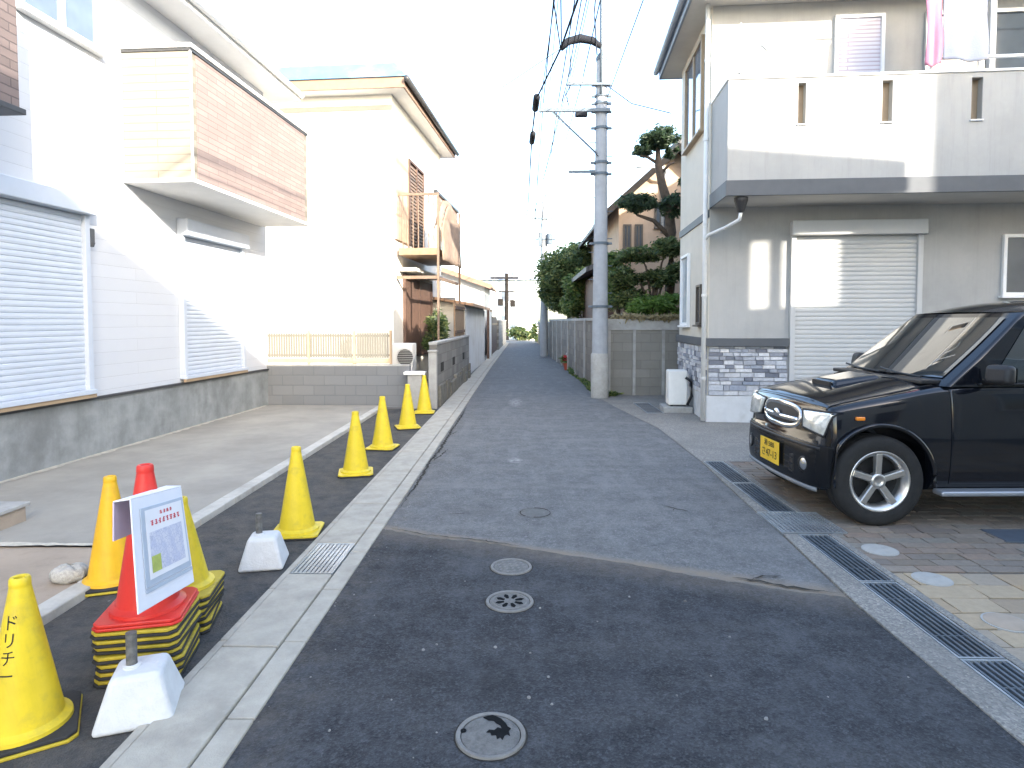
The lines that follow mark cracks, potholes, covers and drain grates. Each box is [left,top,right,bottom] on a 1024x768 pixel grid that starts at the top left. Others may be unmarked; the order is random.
manhole cover [490,558,533,576]
crack [733,575,841,593]
manhole cover [453,712,528,762]
crack [399,408,466,514]
drain grate [290,543,355,578]
drain grate [757,512,848,536]
drain grate [860,582,1005,660]
drain grate [634,403,664,413]
drain grate [732,483,795,512]
